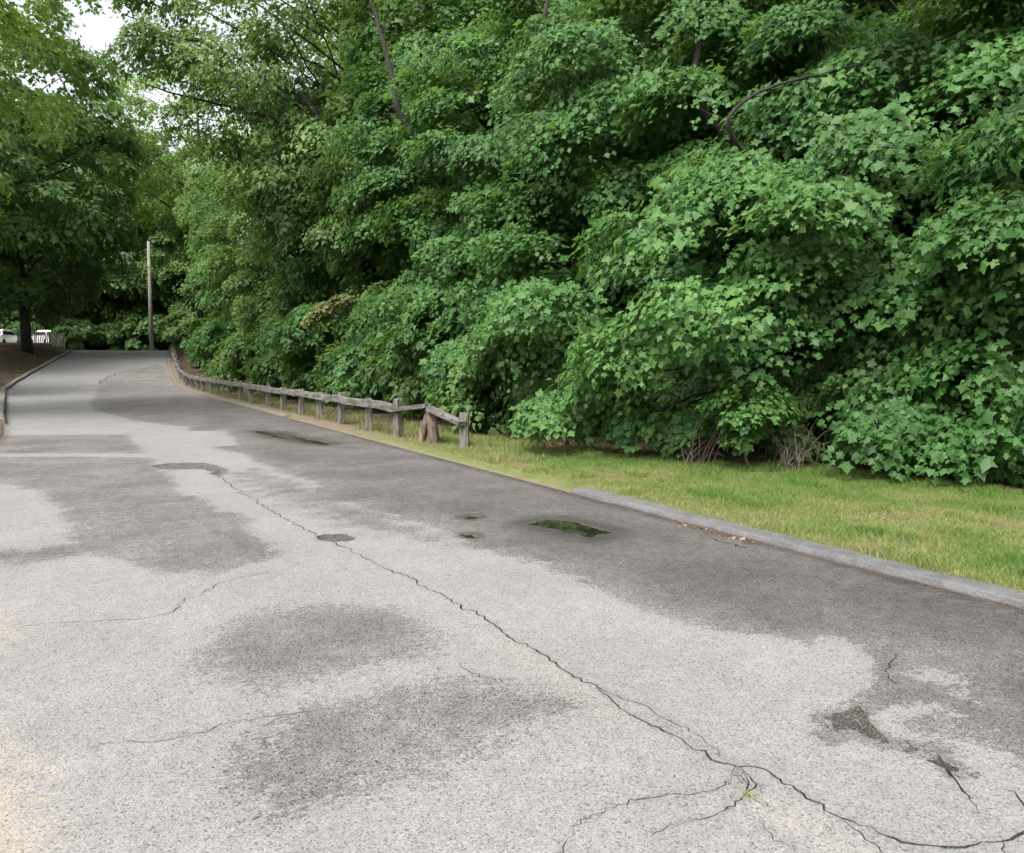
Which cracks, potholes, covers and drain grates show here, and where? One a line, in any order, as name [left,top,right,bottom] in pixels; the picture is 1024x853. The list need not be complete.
pothole [823,706,889,743]
crack [27,571,269,626]
crack [99,710,317,745]
crack [213,472,1024,853]
